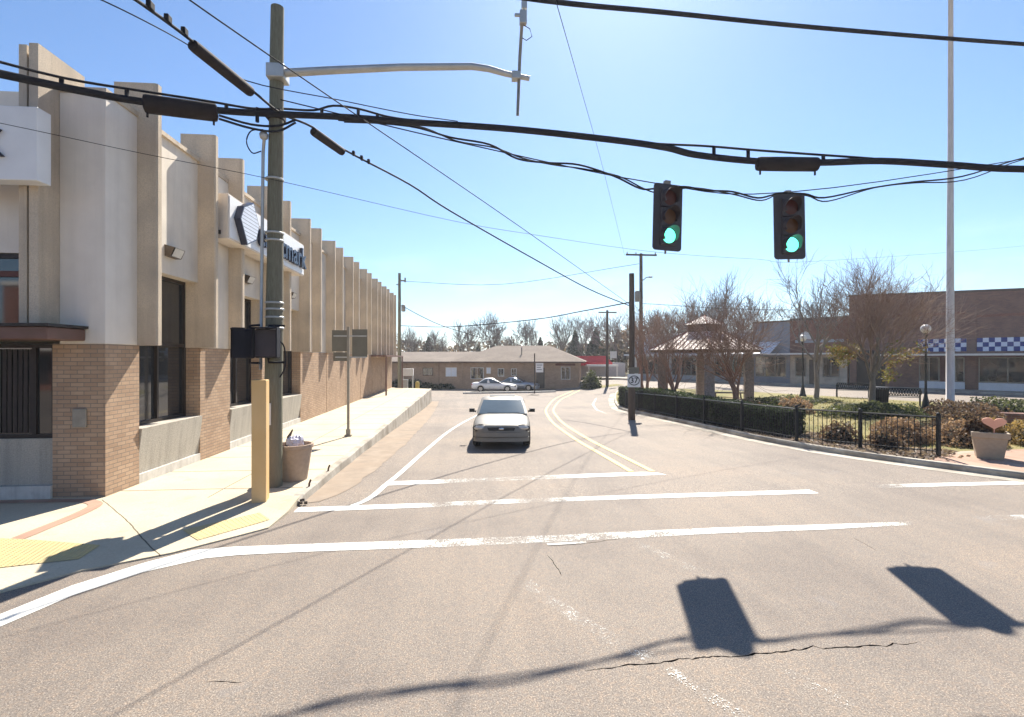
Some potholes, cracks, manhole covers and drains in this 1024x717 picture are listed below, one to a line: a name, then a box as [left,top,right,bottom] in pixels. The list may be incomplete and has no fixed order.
crack [587,642,917,671]
